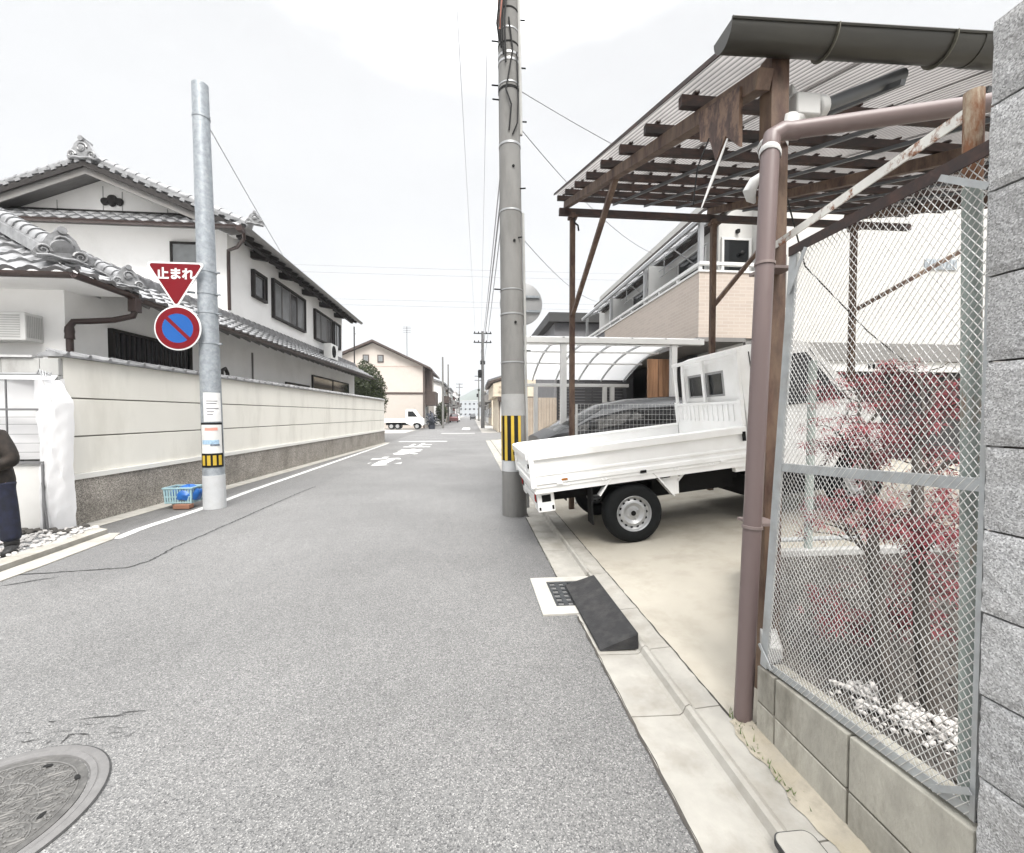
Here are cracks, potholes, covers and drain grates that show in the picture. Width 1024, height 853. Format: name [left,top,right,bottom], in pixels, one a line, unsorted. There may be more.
manhole cover [0,744,112,853]
crack [0,710,172,752]
drain grate [530,576,588,616]
